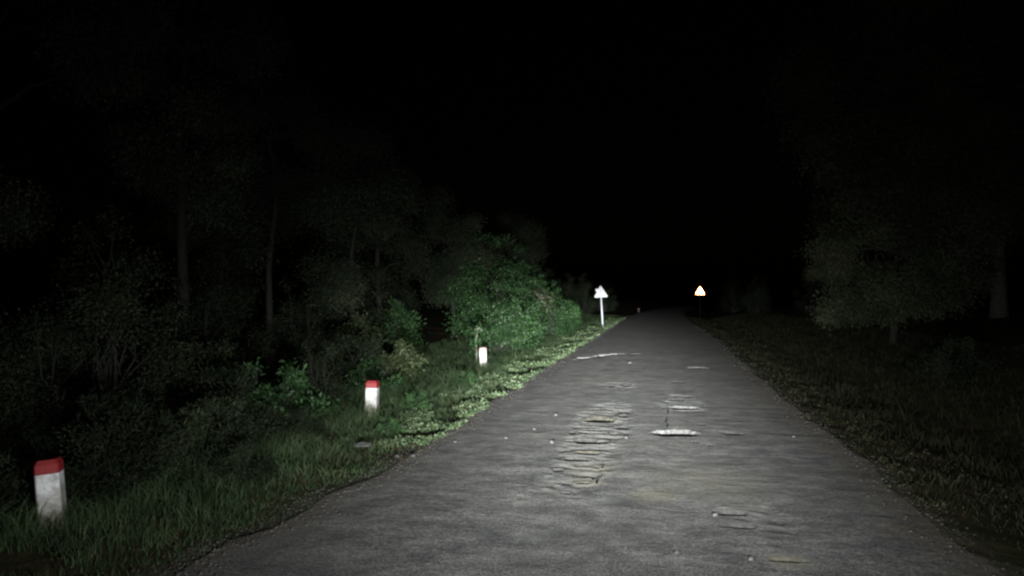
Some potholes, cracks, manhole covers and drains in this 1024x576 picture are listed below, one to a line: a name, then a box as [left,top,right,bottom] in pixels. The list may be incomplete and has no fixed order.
crack [527,354,804,535]
